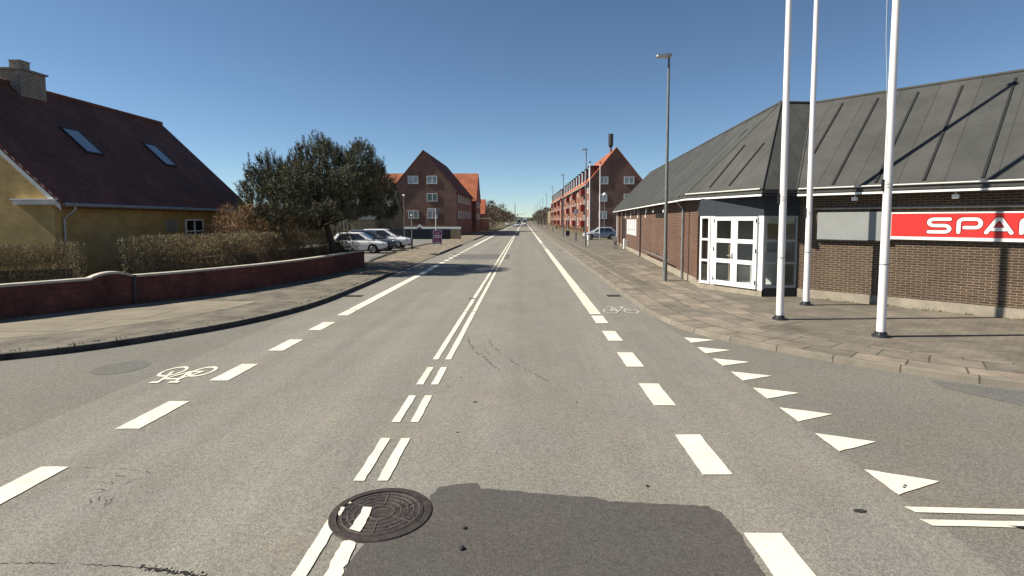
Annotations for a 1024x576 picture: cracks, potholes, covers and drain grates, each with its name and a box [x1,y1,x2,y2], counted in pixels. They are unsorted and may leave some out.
crack [63,467,150,504]
manhole cover [328,488,432,543]
crack [1,562,207,576]
